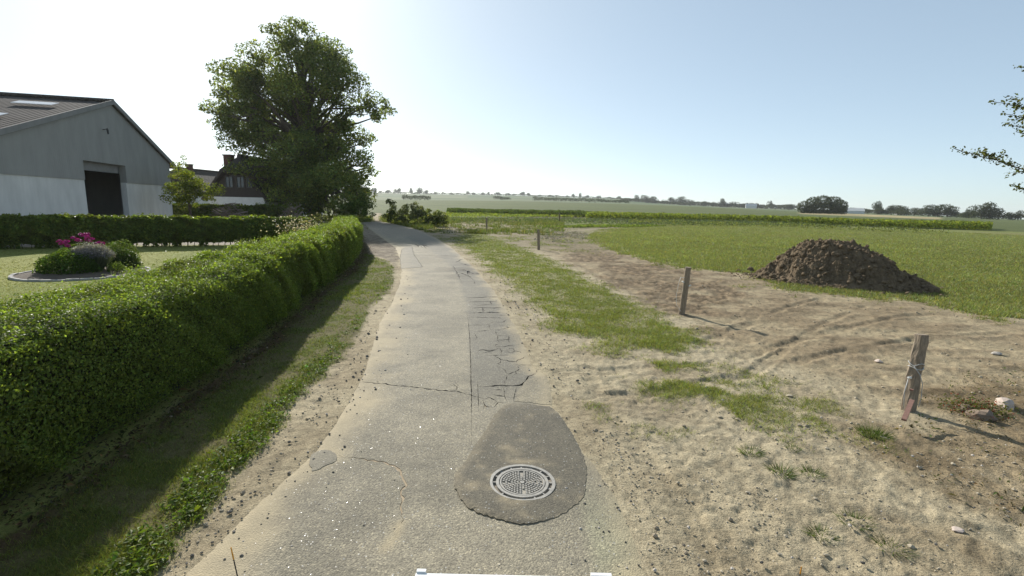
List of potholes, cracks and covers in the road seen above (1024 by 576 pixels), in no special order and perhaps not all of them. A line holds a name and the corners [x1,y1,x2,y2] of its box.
crack [367,259,534,409]
manhole cover [490,464,555,500]
crack [346,457,408,523]
